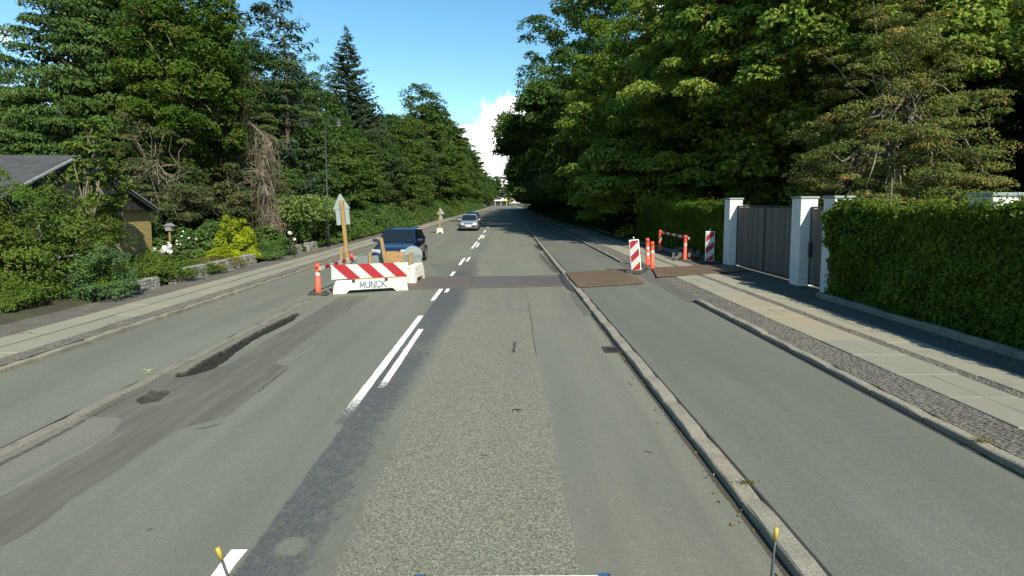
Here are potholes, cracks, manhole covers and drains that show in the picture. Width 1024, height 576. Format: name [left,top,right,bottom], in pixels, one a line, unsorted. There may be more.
pothole [168,312,303,379]
pothole [127,386,177,407]
